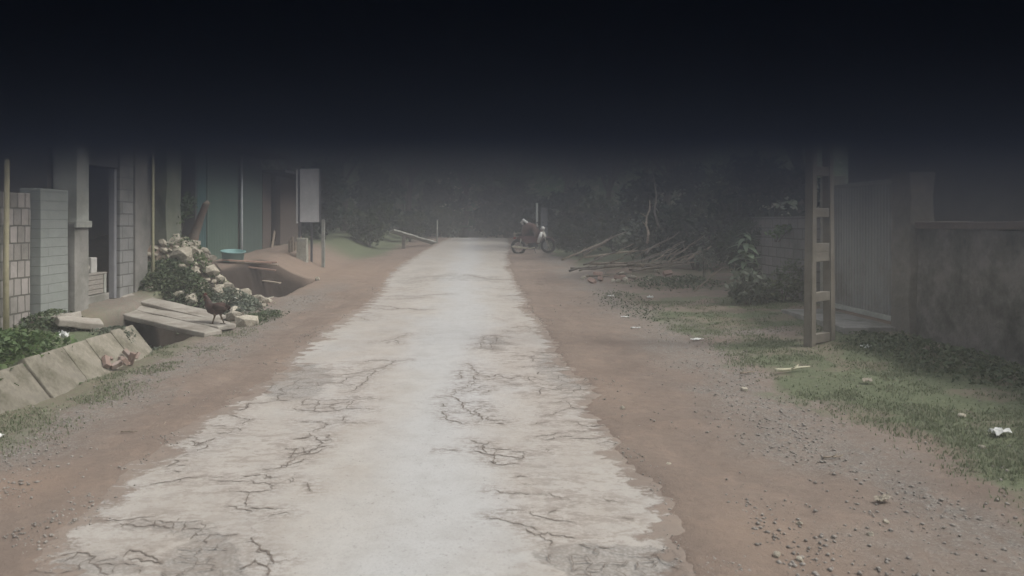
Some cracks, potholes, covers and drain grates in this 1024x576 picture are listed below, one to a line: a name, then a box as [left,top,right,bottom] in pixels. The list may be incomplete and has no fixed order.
crack [150,334,409,516]
crack [28,515,290,576]
crack [430,275,680,576]
